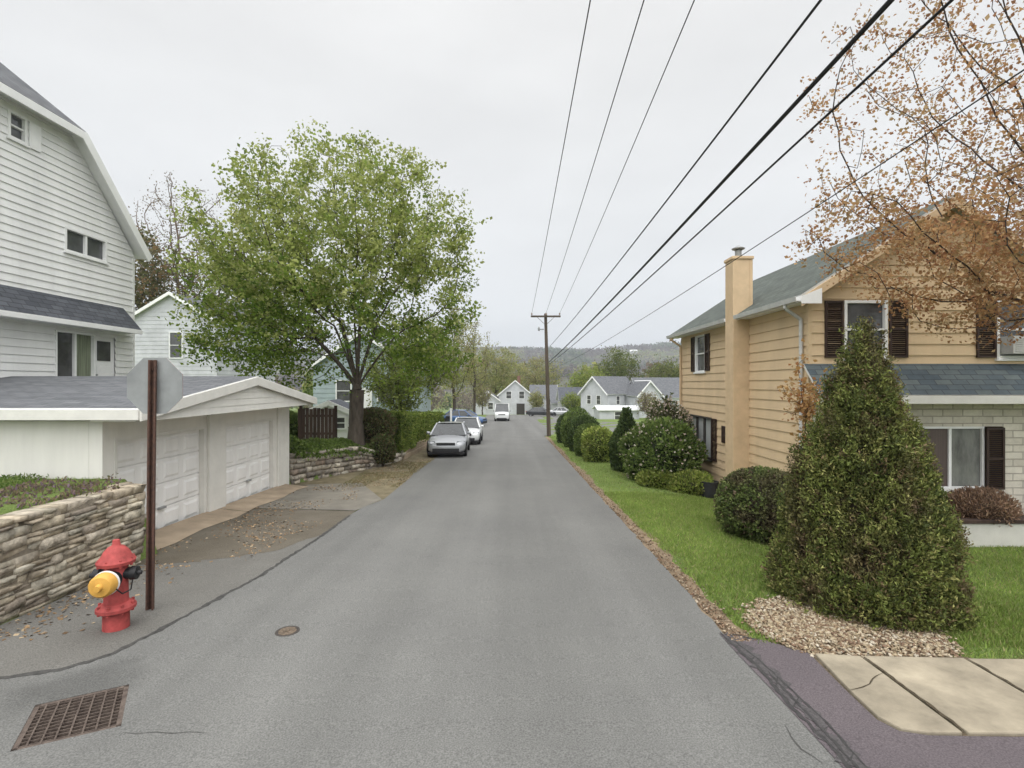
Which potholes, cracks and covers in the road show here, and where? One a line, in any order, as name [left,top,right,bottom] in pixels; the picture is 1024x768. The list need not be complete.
drain grate [10,685,129,752]
manhole cover [275,626,300,637]
crack [720,632,882,768]
